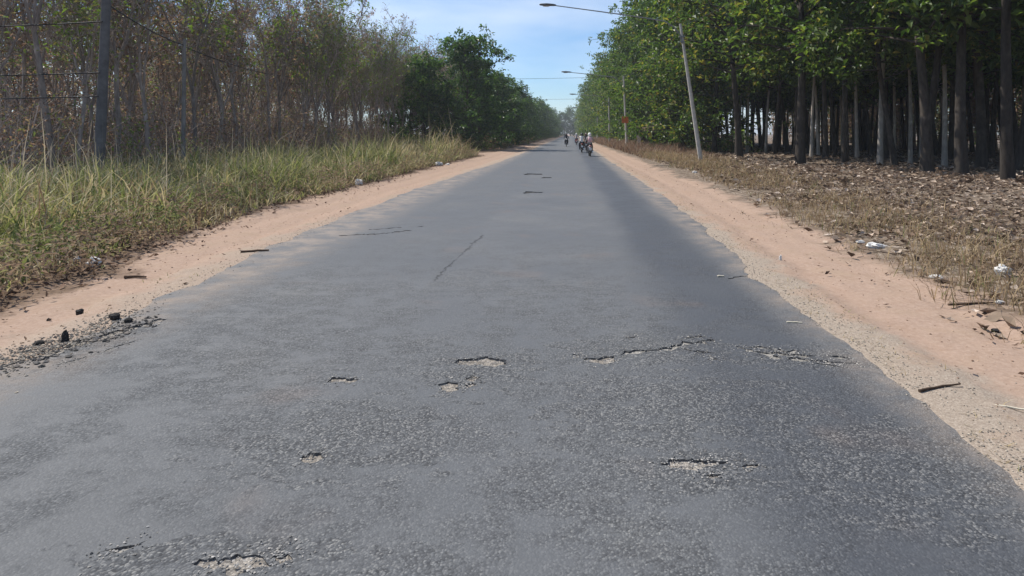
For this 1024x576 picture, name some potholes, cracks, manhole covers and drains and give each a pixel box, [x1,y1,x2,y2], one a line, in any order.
pothole [301,452,323,463]
pothole [438,375,481,392]
crack [340,226,423,236]
crack [572,336,716,360]
crack [434,235,484,281]
pothole [455,356,506,367]
pothole [584,356,615,364]
pothole [661,459,727,479]
pothole [193,554,293,576]
